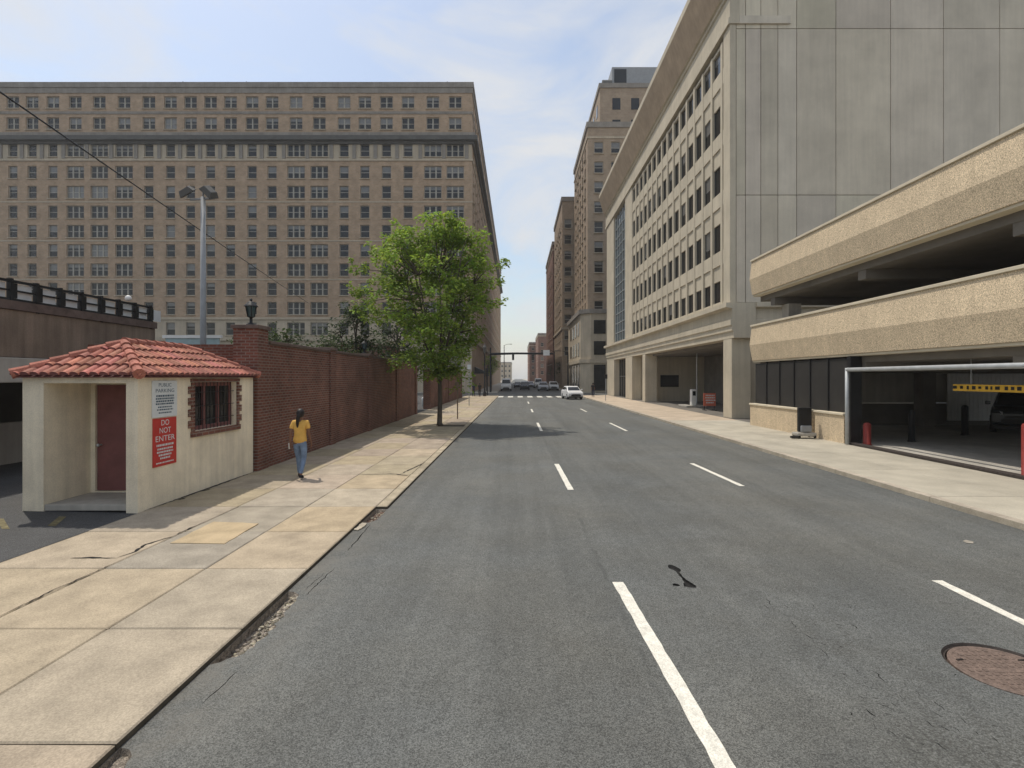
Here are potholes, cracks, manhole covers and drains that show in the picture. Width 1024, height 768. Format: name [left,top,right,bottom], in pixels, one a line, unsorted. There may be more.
pothole [354,509,386,531]
manhole cover [941,643,1024,696]
pothole [211,591,299,664]
